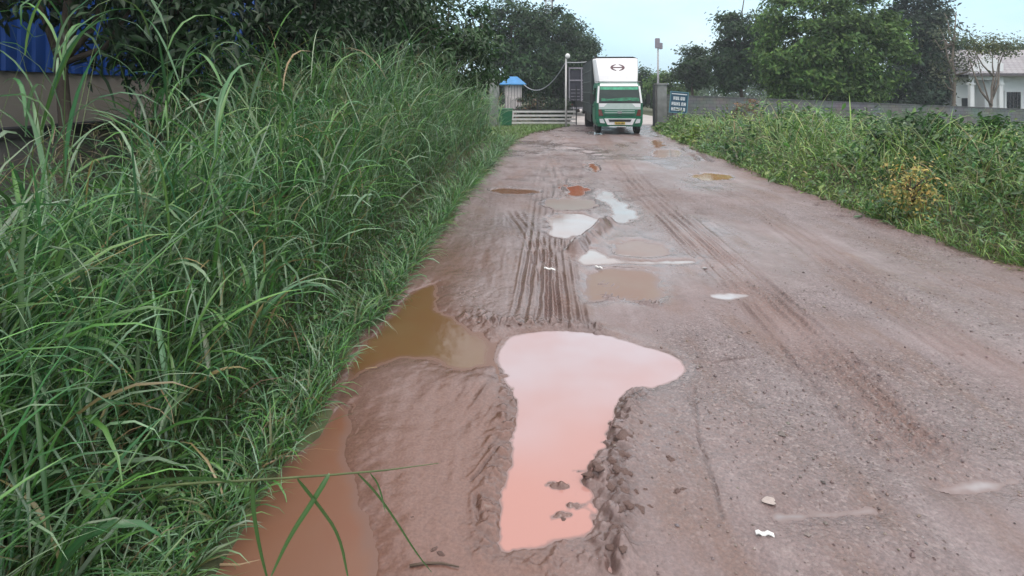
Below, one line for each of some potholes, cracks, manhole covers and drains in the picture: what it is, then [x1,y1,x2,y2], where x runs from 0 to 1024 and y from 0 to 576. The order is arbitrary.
pothole [488,325,711,573]
pothole [591,189,641,223]
pothole [319,281,508,434]
pothole [707,290,751,300]
pothole [558,184,592,196]
pothole [560,240,714,272]
pothole [582,266,668,303]
pothole [544,212,599,242]
pothole [215,403,388,576]
pothole [690,172,734,181]
